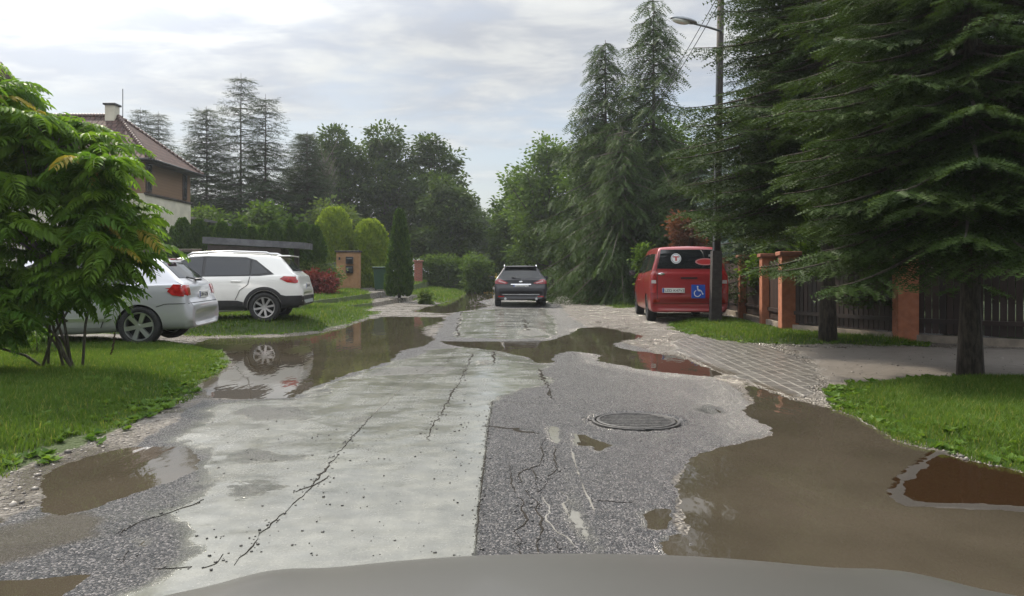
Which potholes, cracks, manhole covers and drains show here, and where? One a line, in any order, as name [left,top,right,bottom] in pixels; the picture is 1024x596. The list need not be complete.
crack [487,426,632,554]
pothole [629,505,681,533]
manhole cover [592,412,680,432]
crack [120,499,204,563]
crack [503,369,555,406]
crack [153,416,372,569]
pothole [565,431,623,454]
